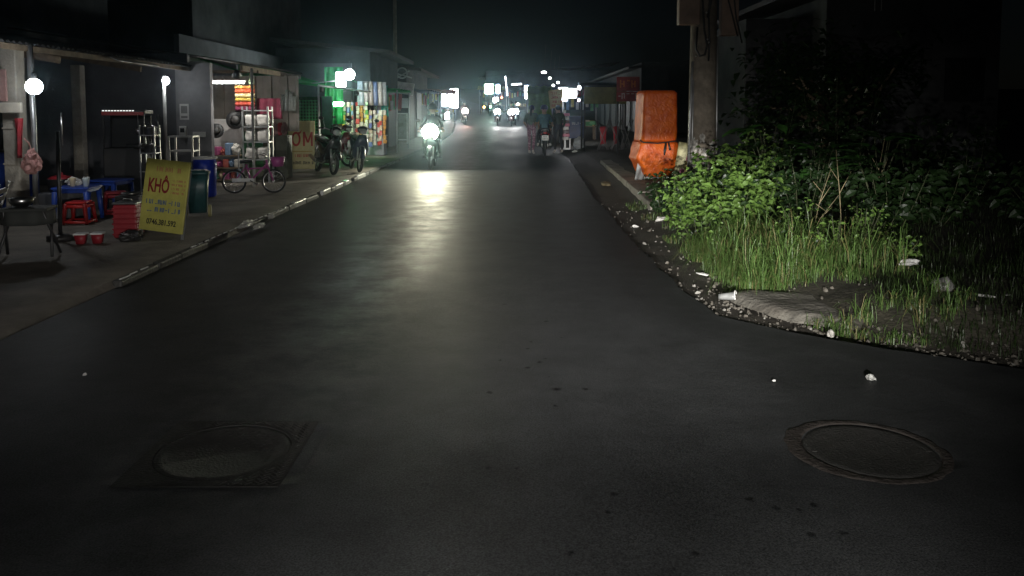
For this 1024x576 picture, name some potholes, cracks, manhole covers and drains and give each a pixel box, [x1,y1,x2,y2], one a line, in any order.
manhole cover [110,421,319,487]
manhole cover [784,420,954,484]
